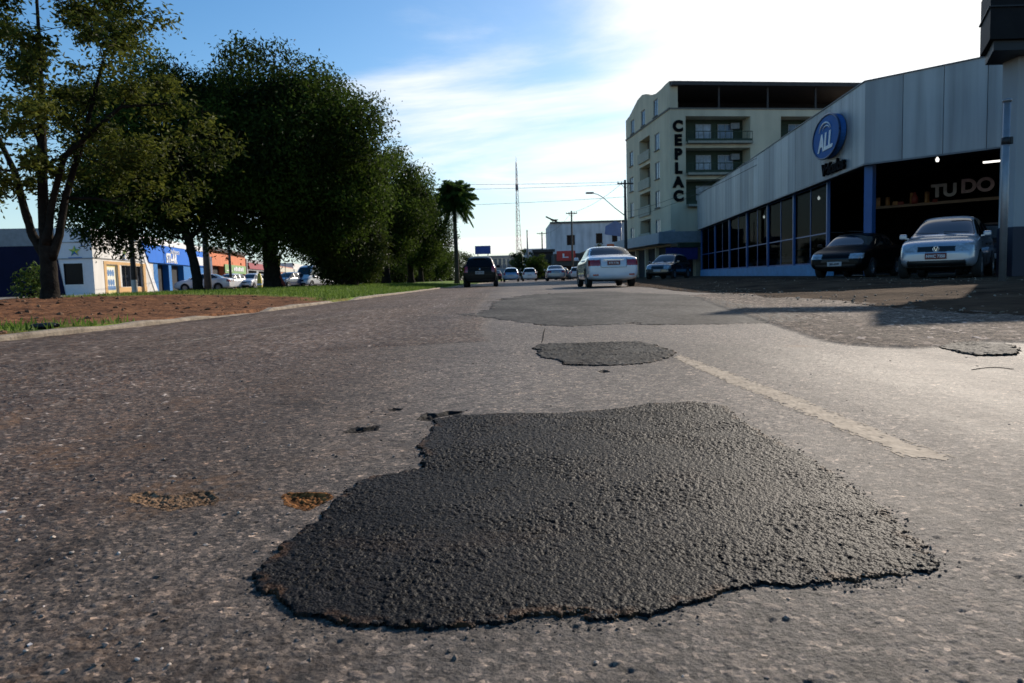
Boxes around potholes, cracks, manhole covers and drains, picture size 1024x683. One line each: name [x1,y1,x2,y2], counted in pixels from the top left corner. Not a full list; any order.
pothole [416,411,465,421]
pothole [344,425,379,433]
pothole [127,490,219,511]
pothole [281,492,334,511]
